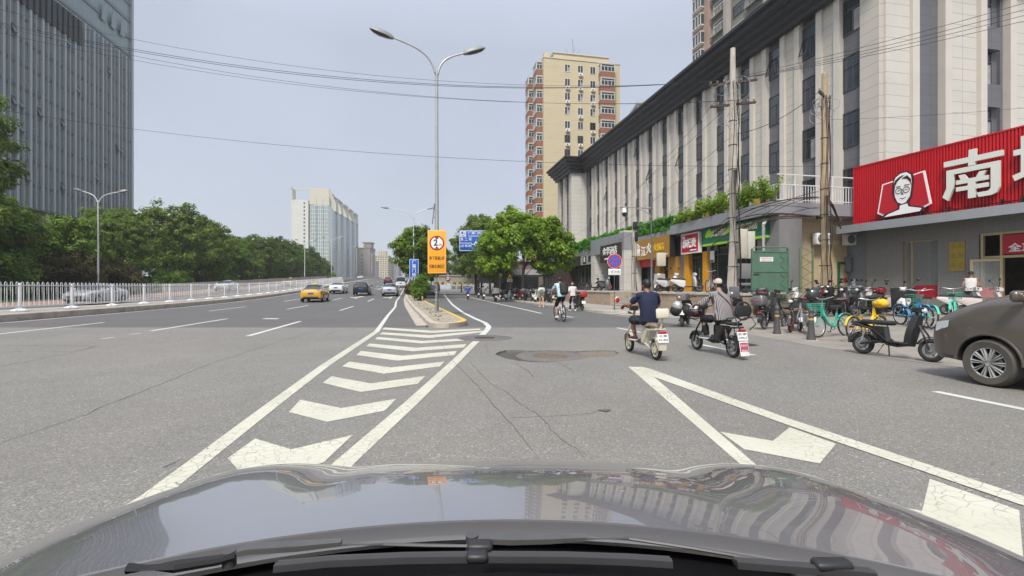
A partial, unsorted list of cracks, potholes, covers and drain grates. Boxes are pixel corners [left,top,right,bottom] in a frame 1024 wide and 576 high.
crack [471,341,611,454]
manhole cover [516,351,587,362]
